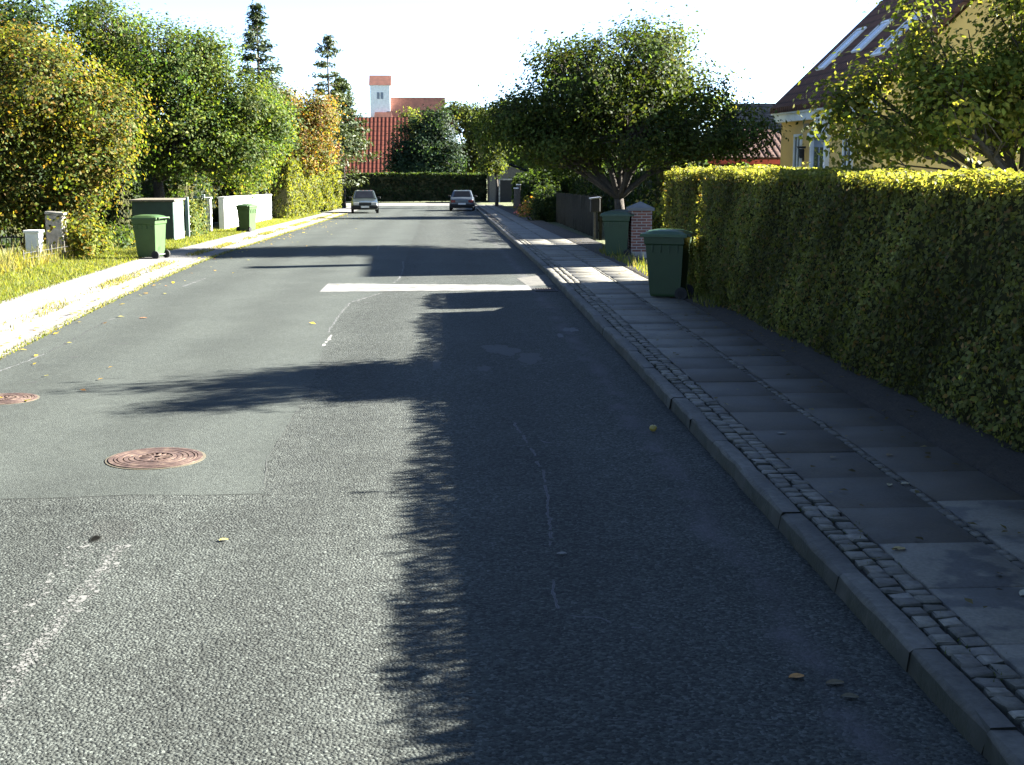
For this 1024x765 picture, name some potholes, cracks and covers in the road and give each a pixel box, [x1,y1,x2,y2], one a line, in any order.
manhole cover [105,447,206,470]
manhole cover [0,393,40,405]
